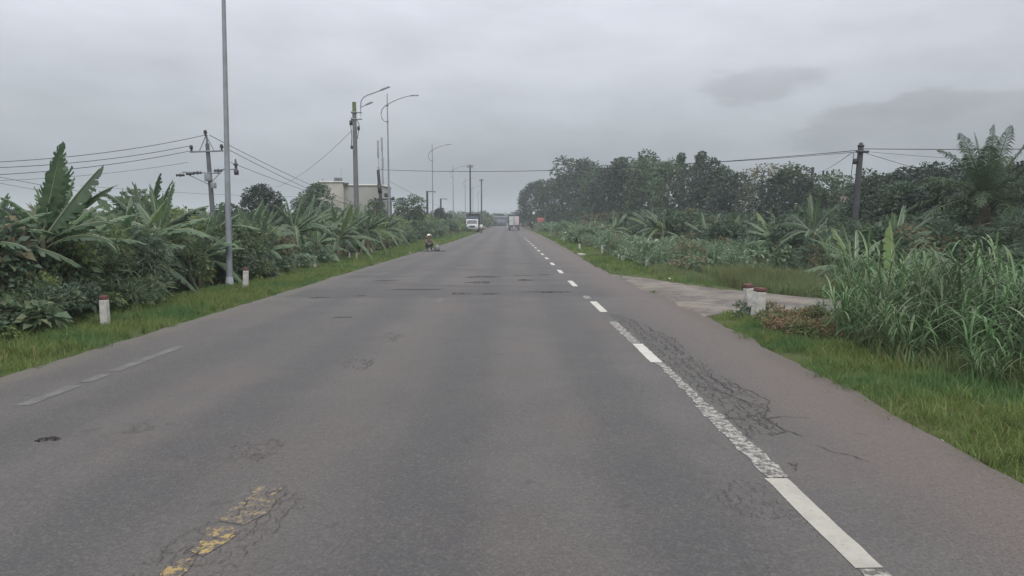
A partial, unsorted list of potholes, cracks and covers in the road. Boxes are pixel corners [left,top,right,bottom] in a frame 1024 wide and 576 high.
crack [611,314,864,460]
